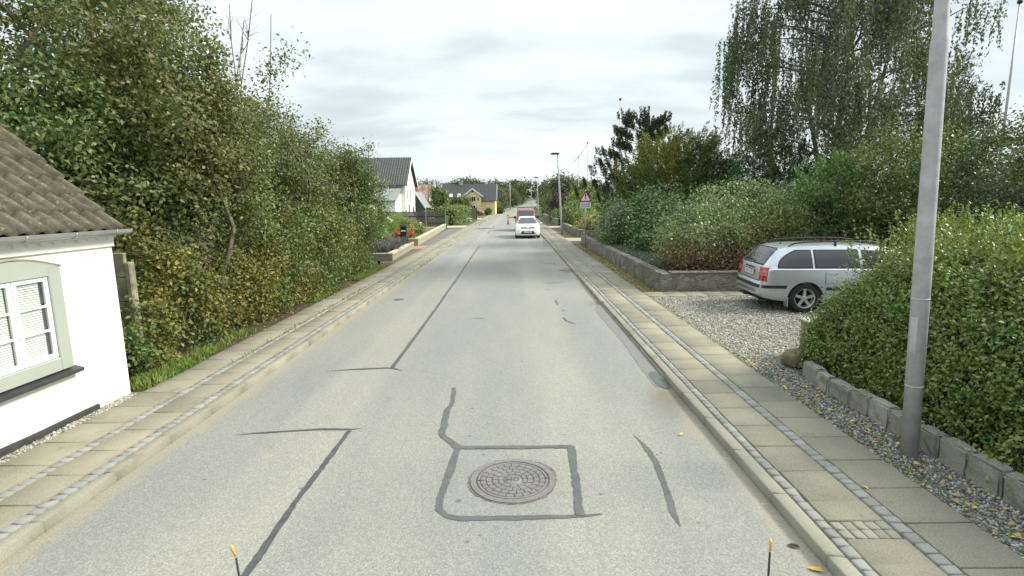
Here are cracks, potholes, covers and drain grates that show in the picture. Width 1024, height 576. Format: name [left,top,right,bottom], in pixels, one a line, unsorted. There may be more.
manhole cover [468,459,557,504]
